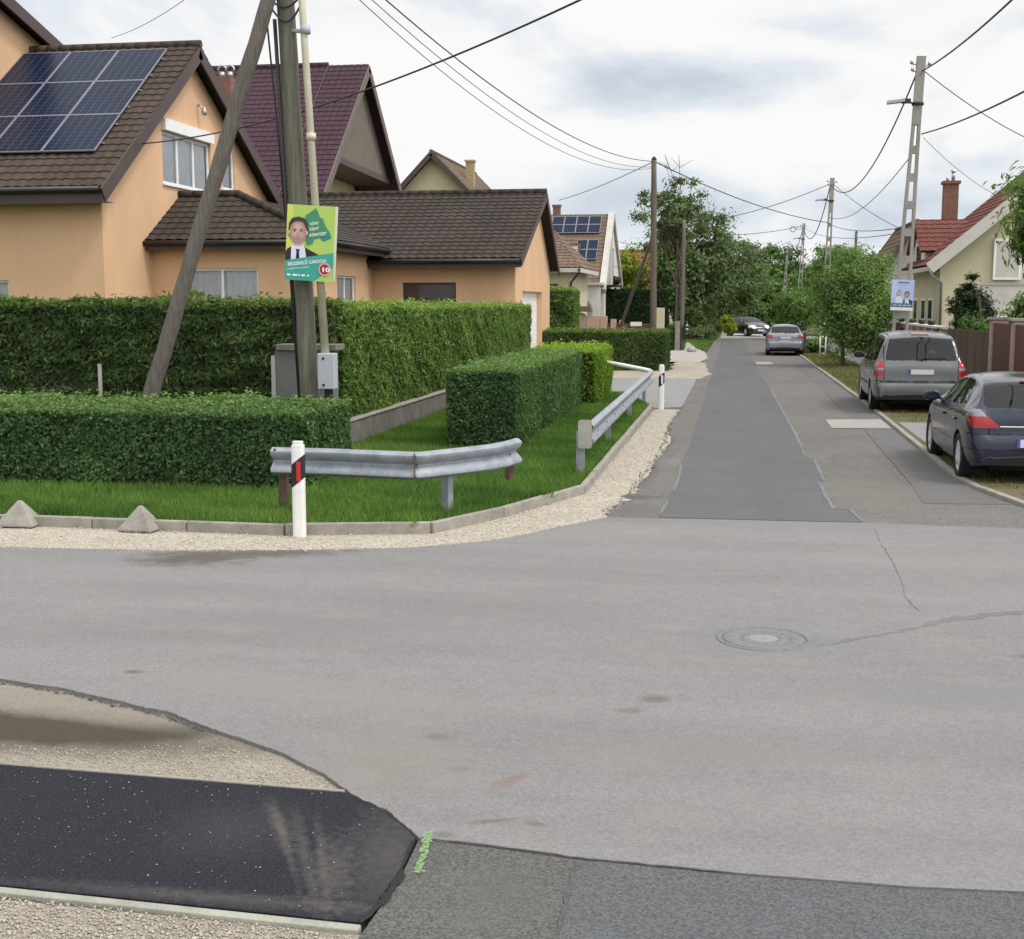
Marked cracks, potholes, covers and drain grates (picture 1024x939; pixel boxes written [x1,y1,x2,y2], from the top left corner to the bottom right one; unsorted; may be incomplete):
manhole cover [716,626,812,652]
crack [875,530,920,611]
